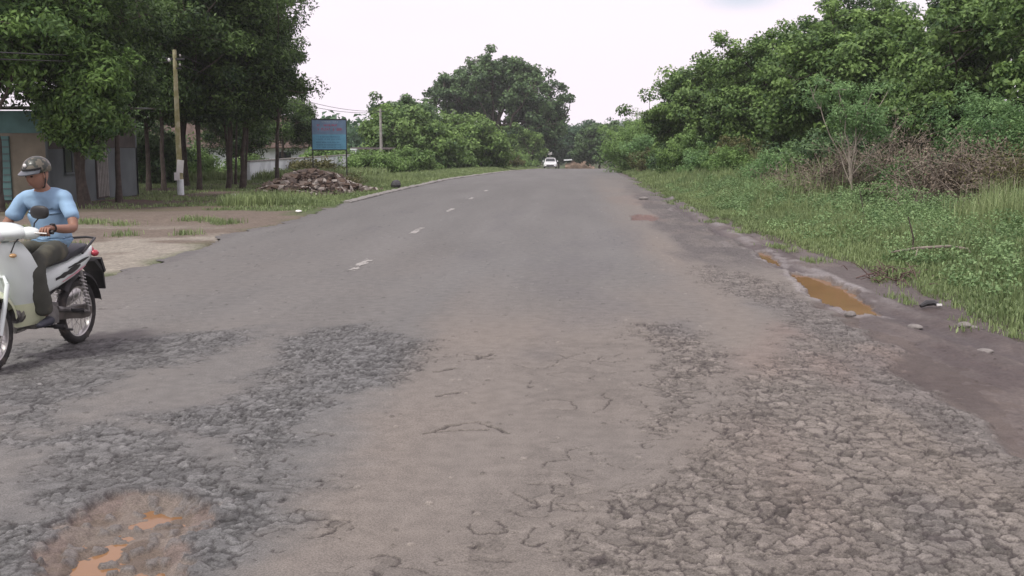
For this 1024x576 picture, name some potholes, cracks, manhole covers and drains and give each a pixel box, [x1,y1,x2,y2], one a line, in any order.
pothole [628,213,661,221]
crack [0,263,1024,576]
pothole [747,248,787,268]
pothole [10,482,242,576]
pothole [785,269,890,317]
